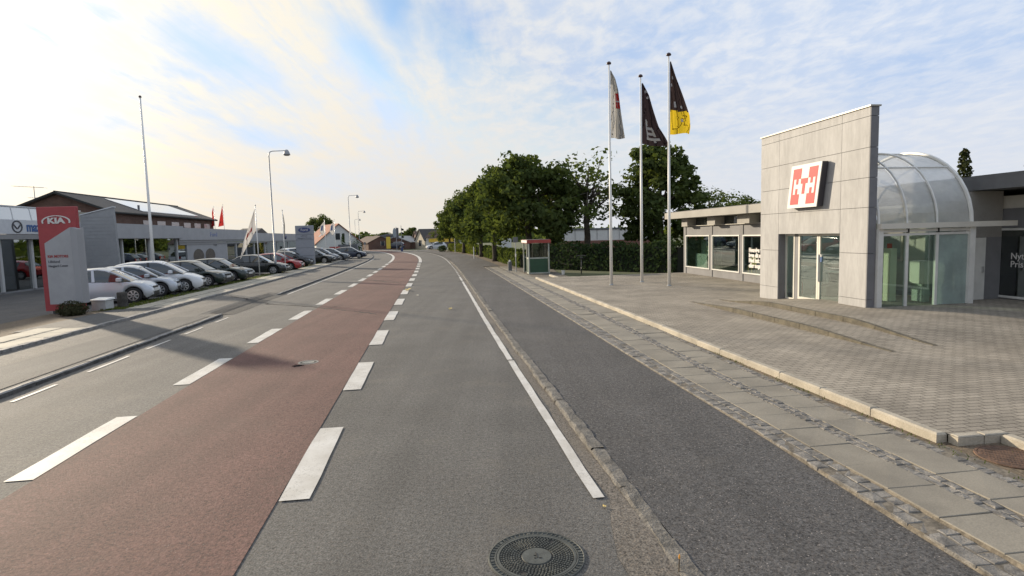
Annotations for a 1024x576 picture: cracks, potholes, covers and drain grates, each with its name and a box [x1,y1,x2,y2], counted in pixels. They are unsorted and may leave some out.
manhole cover [973,445,1024,469]
manhole cover [488,532,586,576]
